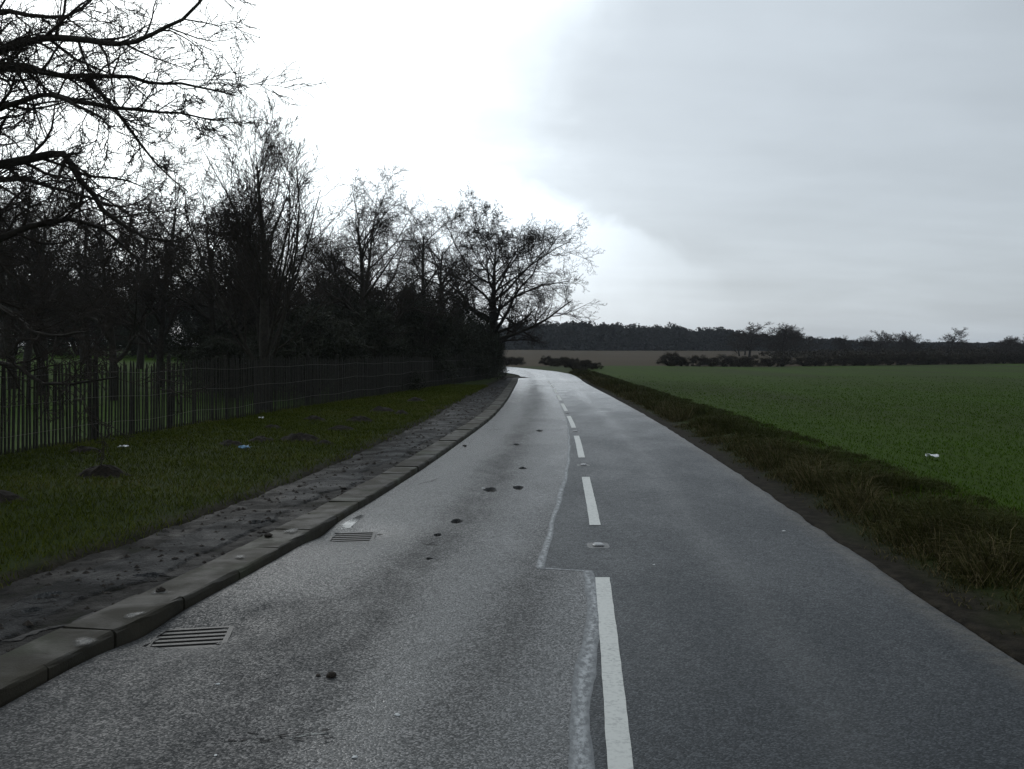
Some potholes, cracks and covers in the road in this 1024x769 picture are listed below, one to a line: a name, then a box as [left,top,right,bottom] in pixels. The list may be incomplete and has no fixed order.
drain grate [145,626,234,649]
pothole [444,517,469,526]
pothole [478,486,503,494]
drain grate [329,532,377,542]
